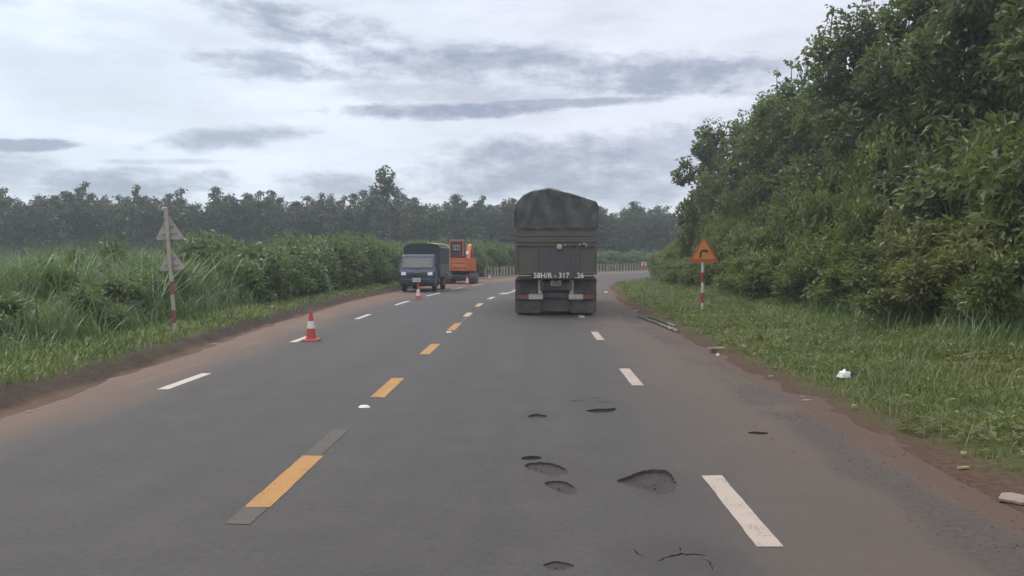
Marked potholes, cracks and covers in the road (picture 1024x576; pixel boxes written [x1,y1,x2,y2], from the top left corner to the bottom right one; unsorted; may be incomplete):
pothole [524,462,569,477]
pothole [617,469,677,495]
crack [633,547,713,569]
pothole [544,480,578,495]
pothole [543,561,575,571]
